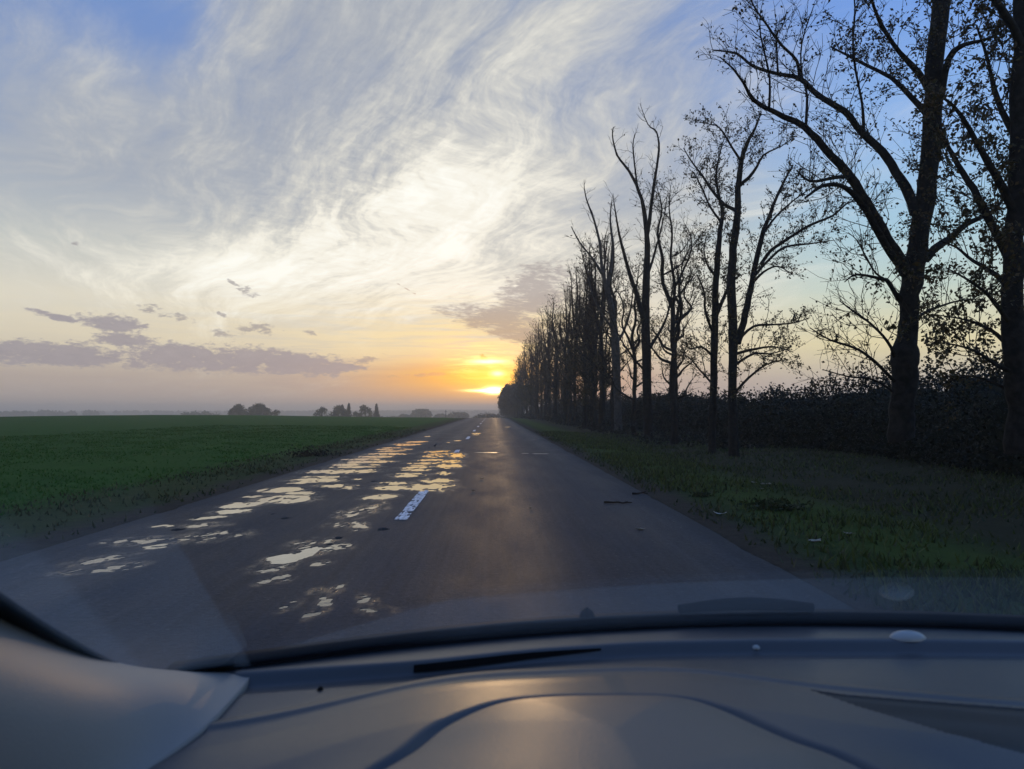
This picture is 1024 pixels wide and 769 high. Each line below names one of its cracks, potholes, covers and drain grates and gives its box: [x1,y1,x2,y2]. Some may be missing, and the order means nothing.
pothole [218,494,314,509]
pothole [63,553,129,567]
pothole [410,478,456,492]
pothole [98,536,174,546]
pothole [301,584,347,618]
pothole [356,595,392,614]
pothole [290,539,353,552]
pothole [262,546,333,565]
pothole [56,562,143,576]
pothole [174,530,246,544]
